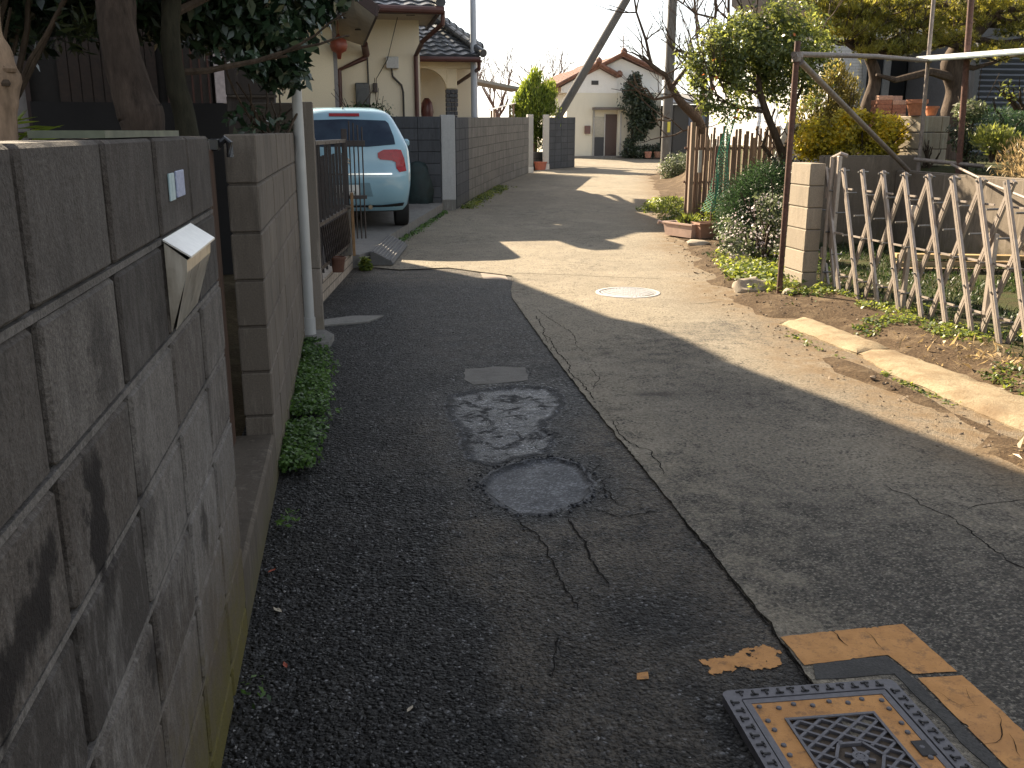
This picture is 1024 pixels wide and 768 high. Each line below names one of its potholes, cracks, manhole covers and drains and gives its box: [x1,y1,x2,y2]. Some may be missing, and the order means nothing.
utility cover [722,679,973,768]
crack [888,485,1024,568]
crack [516,292,600,399]
crack [606,419,664,474]
manhole cover [596,287,660,298]
crack [515,464,663,609]
